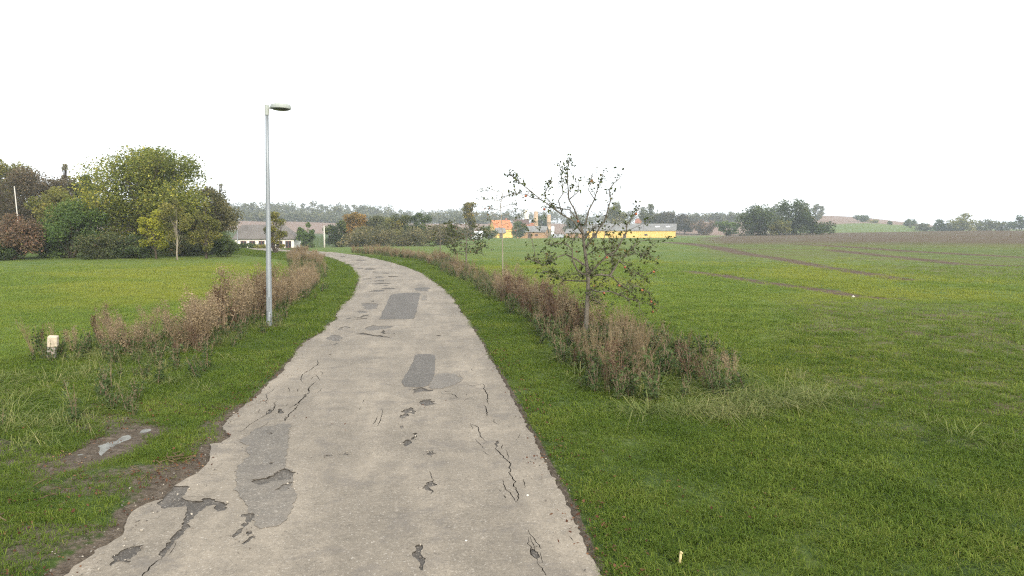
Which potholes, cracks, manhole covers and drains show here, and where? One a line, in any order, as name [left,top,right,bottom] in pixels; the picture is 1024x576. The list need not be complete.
pothole [232,513,254,545]
pothole [157,486,229,559]
crack [238,361,321,432]
crack [527,533,546,575]
crack [445,369,525,500]
pothole [412,544,426,570]
pothole [109,545,143,566]
